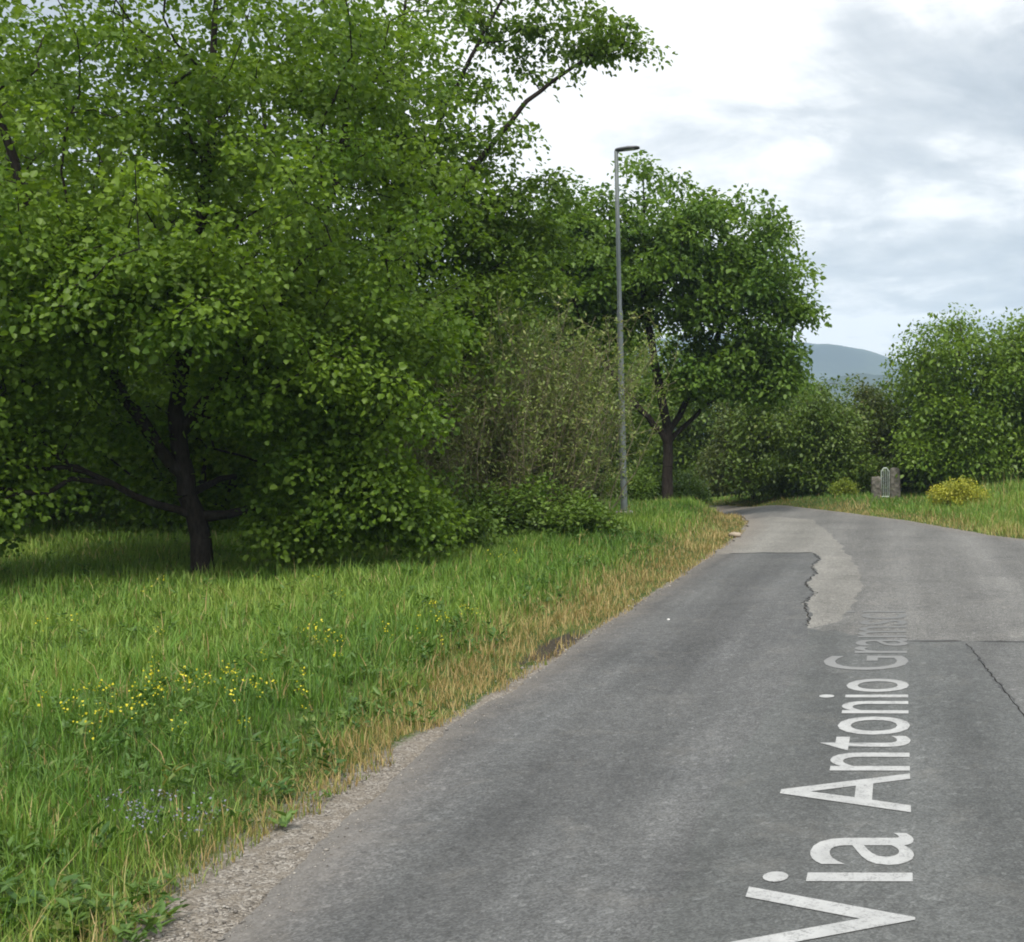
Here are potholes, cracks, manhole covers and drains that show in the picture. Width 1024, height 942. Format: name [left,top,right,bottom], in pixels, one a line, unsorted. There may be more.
crack [966,644,1024,716]
crack [730,552,820,626]
